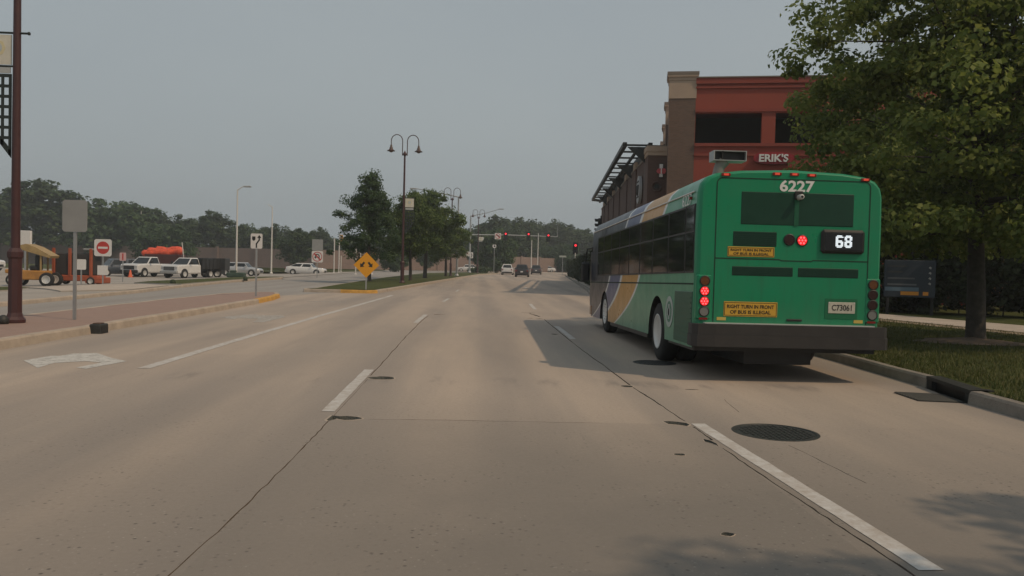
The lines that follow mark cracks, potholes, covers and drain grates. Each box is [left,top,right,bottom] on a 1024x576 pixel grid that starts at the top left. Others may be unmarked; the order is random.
drain grate [894,376,995,404]
manhole cover [731,423,820,442]
